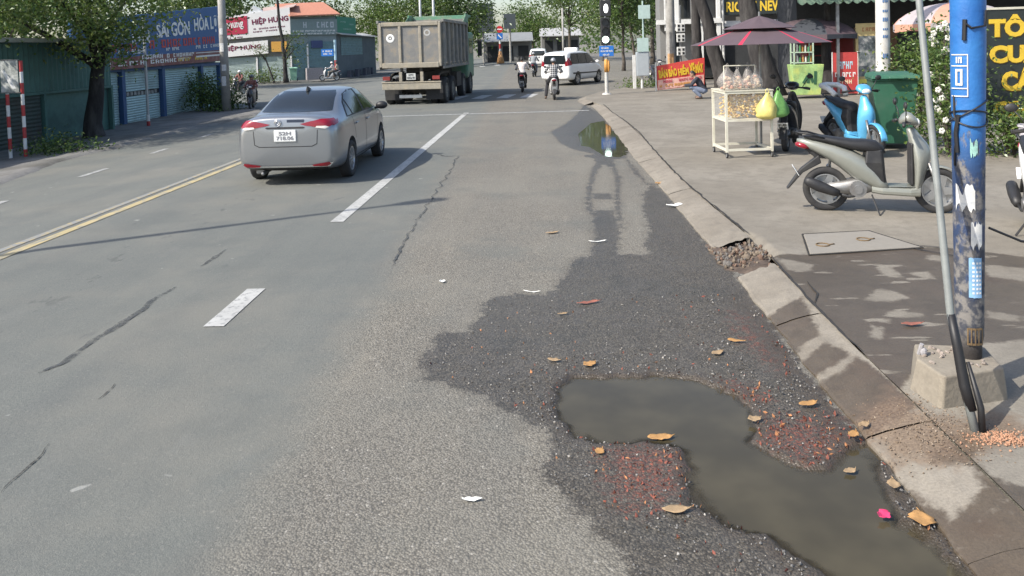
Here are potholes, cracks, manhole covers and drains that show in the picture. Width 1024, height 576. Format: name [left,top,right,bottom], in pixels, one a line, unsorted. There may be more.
manhole cover [801,230,924,256]
pothole [705,239,788,279]
pothole [543,369,975,576]
